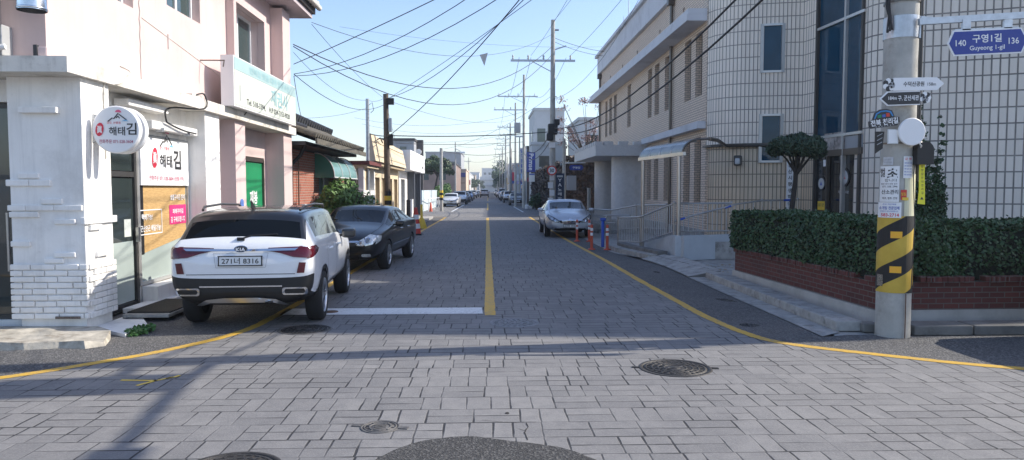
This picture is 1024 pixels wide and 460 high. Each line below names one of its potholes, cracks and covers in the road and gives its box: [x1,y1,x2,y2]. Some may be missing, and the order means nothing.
manhole cover [632,359,719,377]
manhole cover [277,324,332,335]
manhole cover [351,420,409,434]
manhole cover [198,451,281,460]
manhole cover [489,318,539,328]
